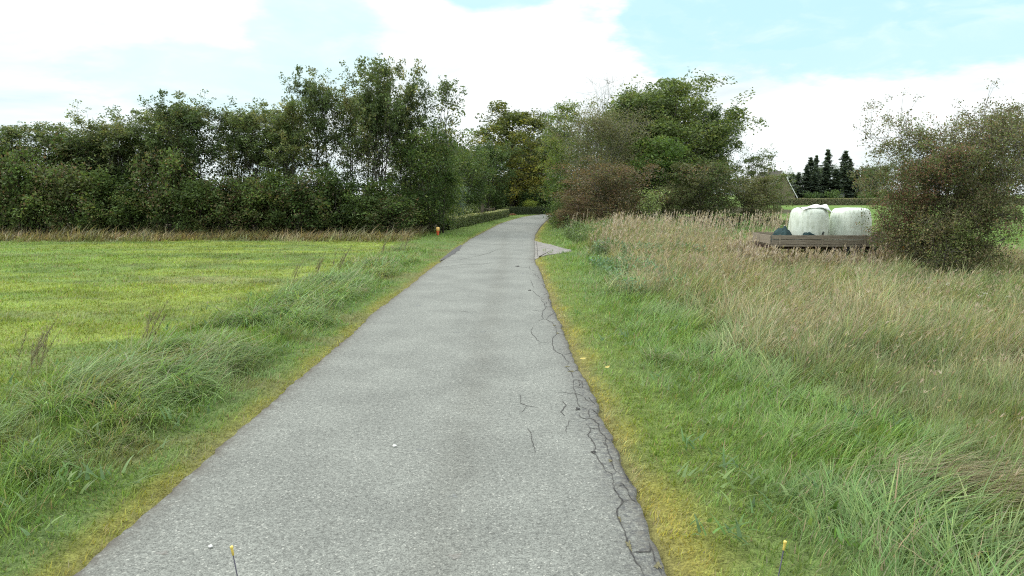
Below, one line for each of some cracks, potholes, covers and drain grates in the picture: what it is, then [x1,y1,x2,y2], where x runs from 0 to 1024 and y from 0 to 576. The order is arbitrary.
crack [525,258,662,575]
